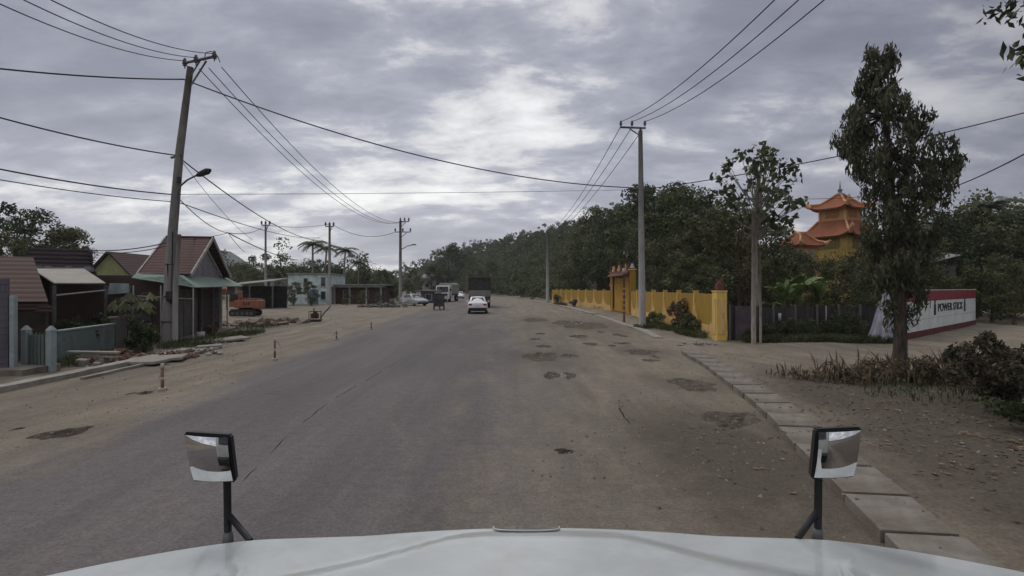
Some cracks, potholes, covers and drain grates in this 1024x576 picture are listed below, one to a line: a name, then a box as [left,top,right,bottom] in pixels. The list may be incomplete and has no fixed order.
pothole [521,352,557,361]
pothole [26,426,94,440]
crack [244,363,396,480]
pothole [666,378,718,392]
